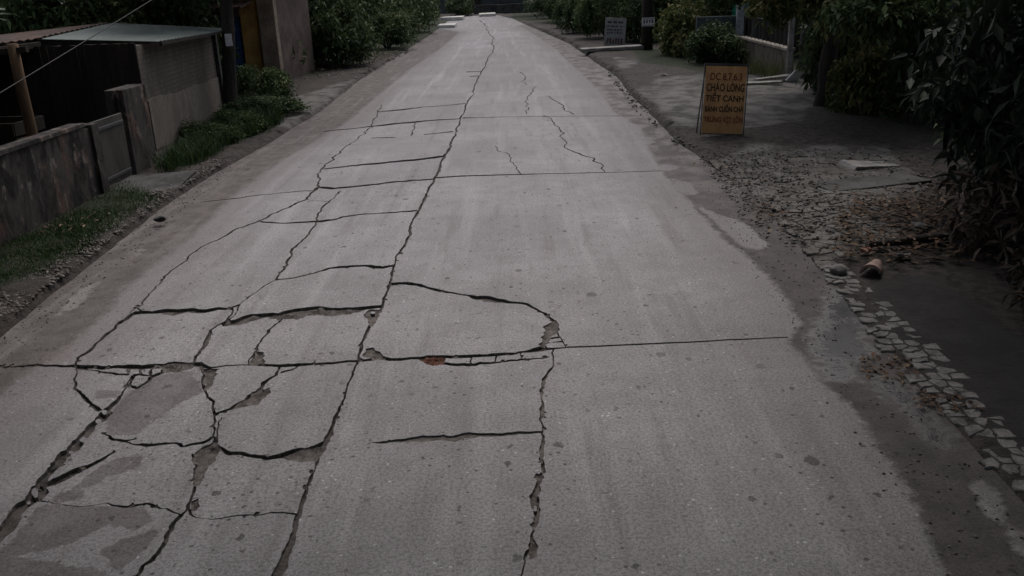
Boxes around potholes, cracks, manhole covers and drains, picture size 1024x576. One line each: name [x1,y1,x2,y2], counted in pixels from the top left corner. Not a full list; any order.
pothole [539,320,559,348]
crack [0,21,568,576]
crack [521,73,605,172]
